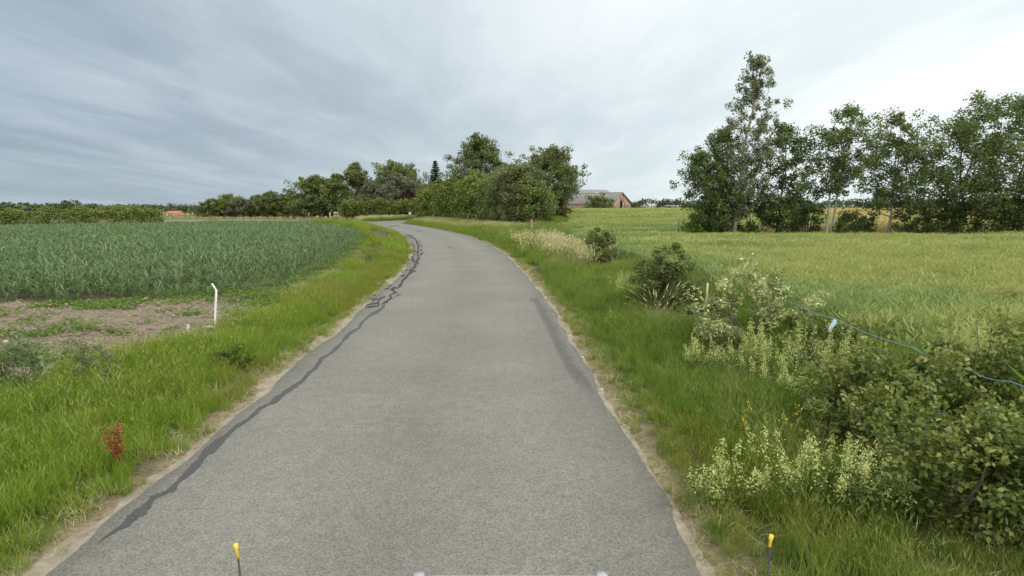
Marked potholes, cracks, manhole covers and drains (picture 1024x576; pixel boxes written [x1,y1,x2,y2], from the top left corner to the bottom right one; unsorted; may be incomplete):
crack [365,226,423,308]
